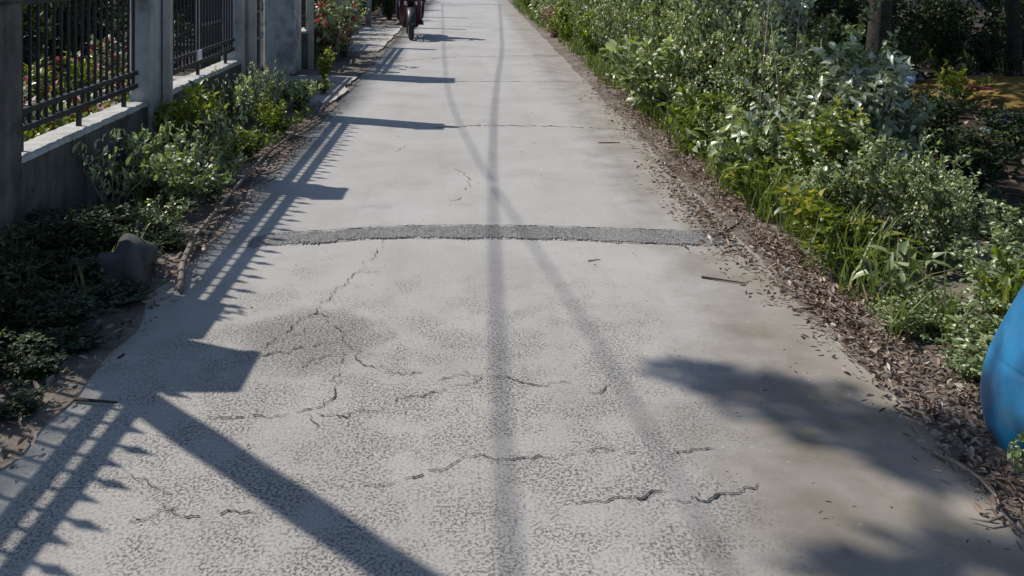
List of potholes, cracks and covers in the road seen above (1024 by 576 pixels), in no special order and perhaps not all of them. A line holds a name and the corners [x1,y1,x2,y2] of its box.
crack [346,447,641,488]
crack [258,243,416,381]
crack [210,371,571,431]
crack [574,484,757,503]
crack [131,475,252,522]
